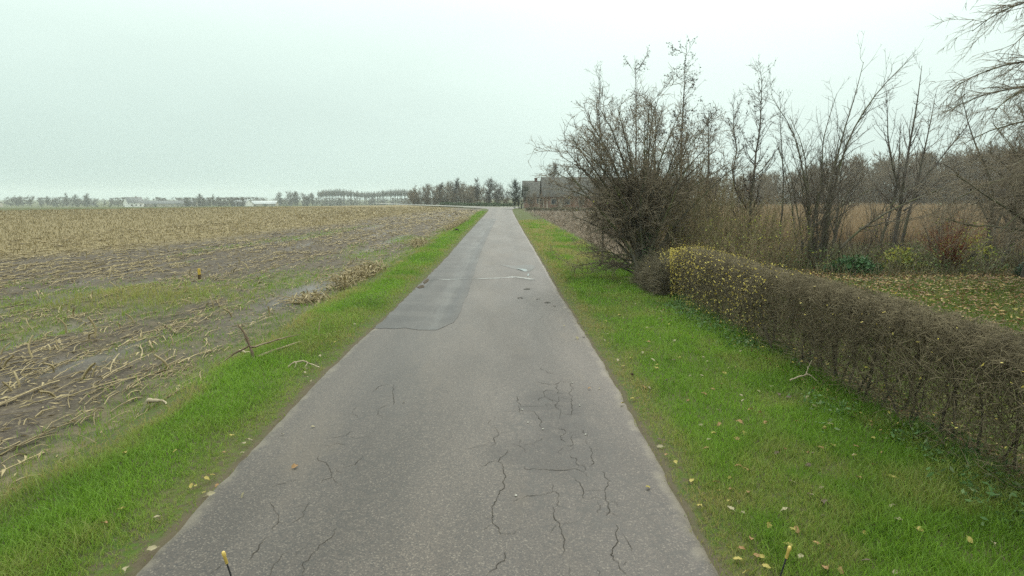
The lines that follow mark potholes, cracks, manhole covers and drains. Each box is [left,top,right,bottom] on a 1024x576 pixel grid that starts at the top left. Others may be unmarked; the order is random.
crack [248,501,337,574]
crack [477,368,632,574]
